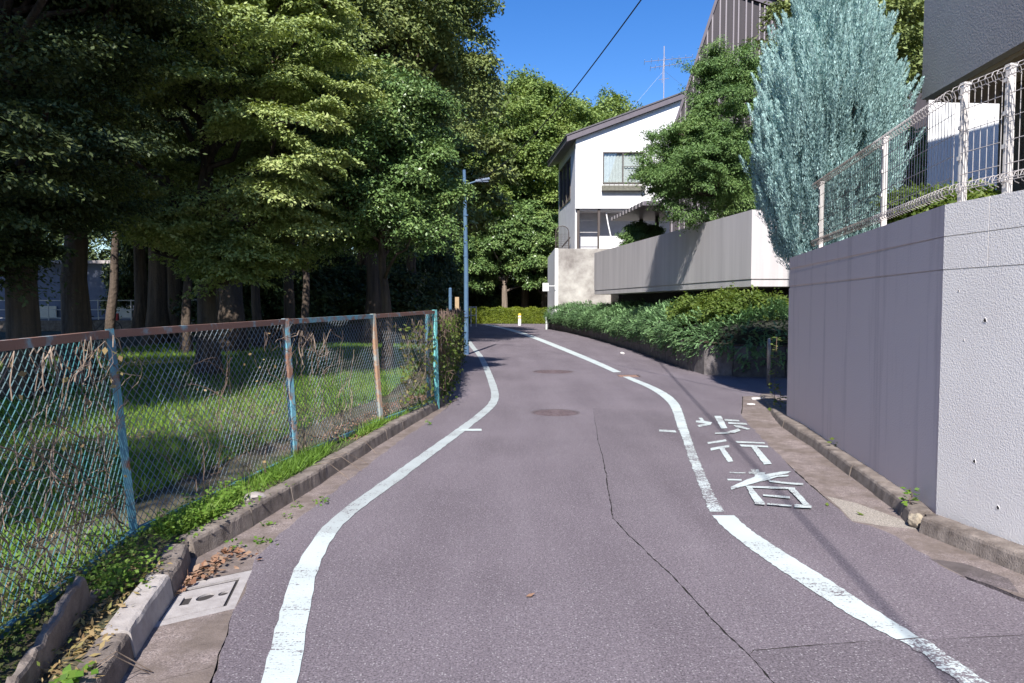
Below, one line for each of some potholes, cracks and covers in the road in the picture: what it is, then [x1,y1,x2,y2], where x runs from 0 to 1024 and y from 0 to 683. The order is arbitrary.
utility cover [155,570,252,627]
crack [593,411,1016,683]
